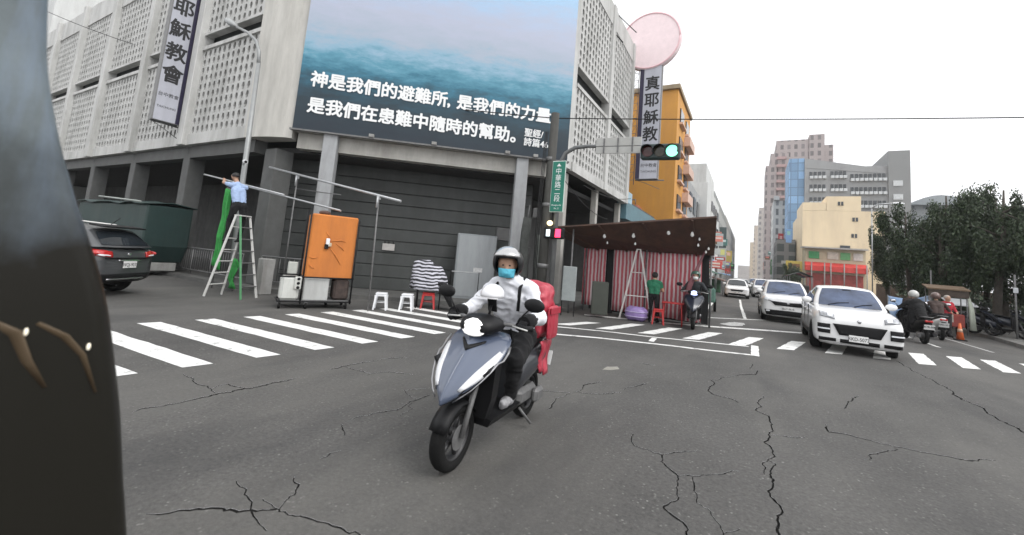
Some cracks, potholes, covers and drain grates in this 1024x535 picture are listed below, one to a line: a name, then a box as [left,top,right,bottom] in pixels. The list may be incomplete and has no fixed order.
crack [545,382,646,409]
crack [321,357,435,459]
crack [755,398,805,535]
crack [134,374,292,412]
crack [707,363,758,402]
crack [897,361,1024,433]
crack [824,426,995,462]
crack [146,477,361,535]
crack [631,435,740,535]
